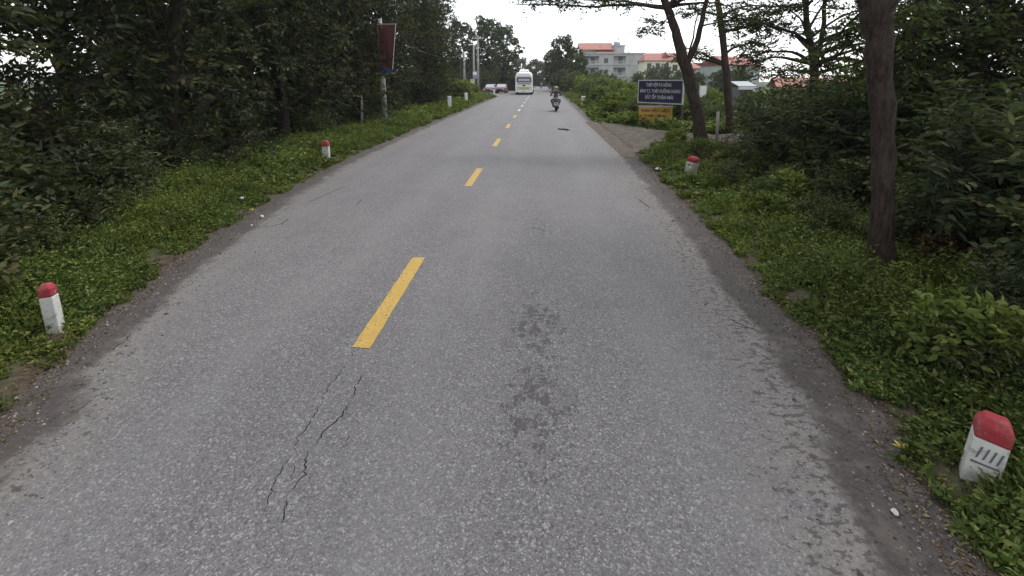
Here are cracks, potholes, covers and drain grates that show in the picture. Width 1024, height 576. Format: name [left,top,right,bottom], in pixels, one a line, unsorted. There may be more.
crack [264,352,362,524]
